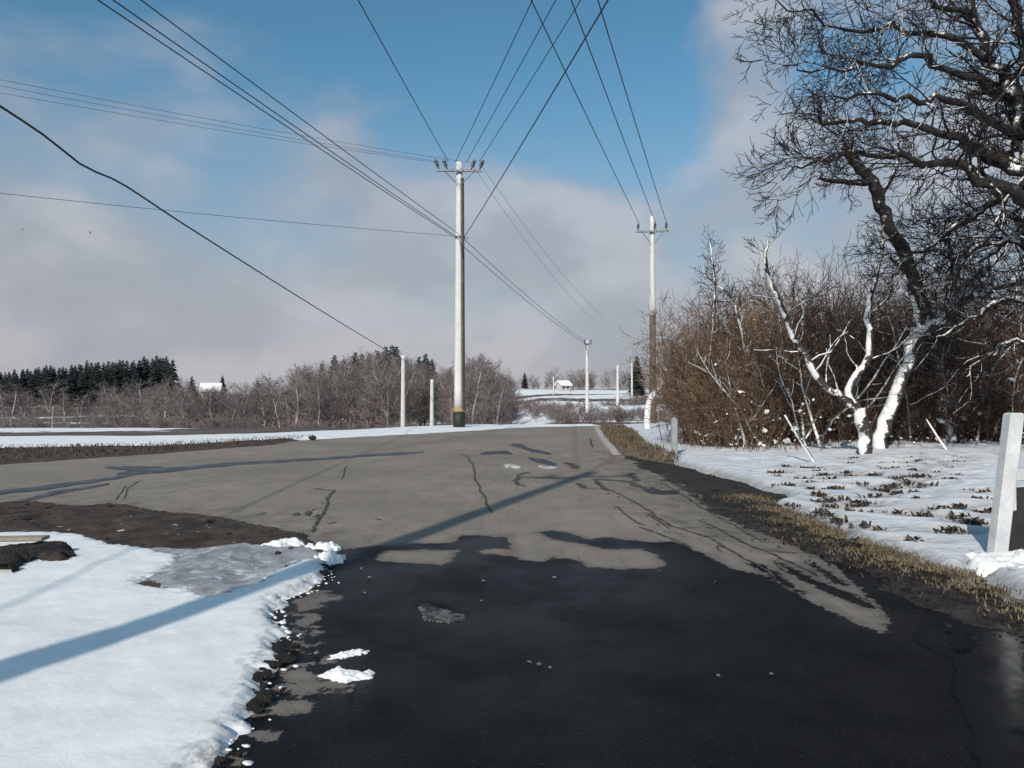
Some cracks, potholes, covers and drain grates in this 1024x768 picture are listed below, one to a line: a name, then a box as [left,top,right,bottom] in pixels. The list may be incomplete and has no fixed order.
crack [511,438,870,601]
crack [310,466,348,532]
